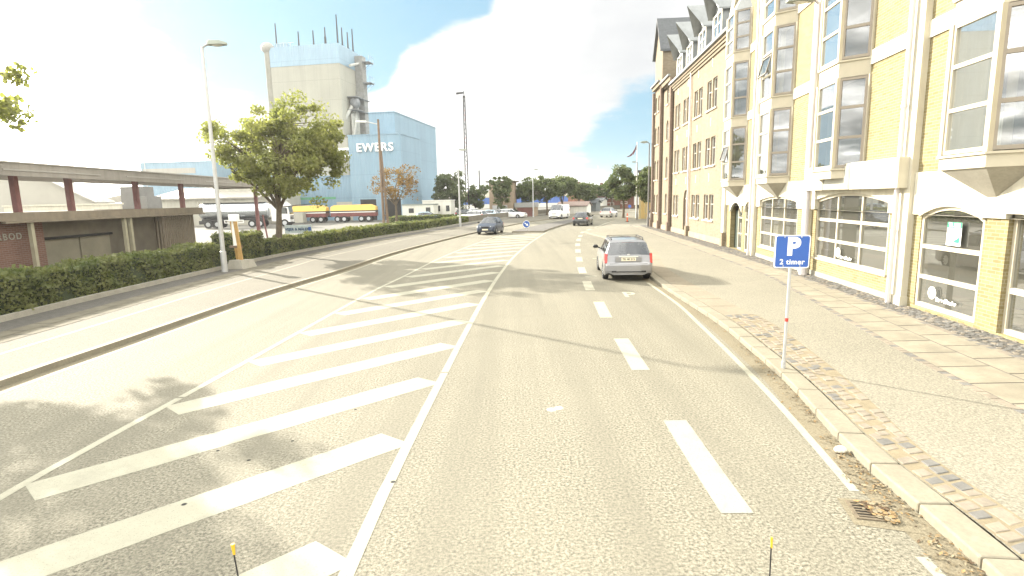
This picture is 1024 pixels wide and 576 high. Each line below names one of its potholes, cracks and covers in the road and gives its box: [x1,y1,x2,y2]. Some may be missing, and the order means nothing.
drain grate [837,498,924,534]
